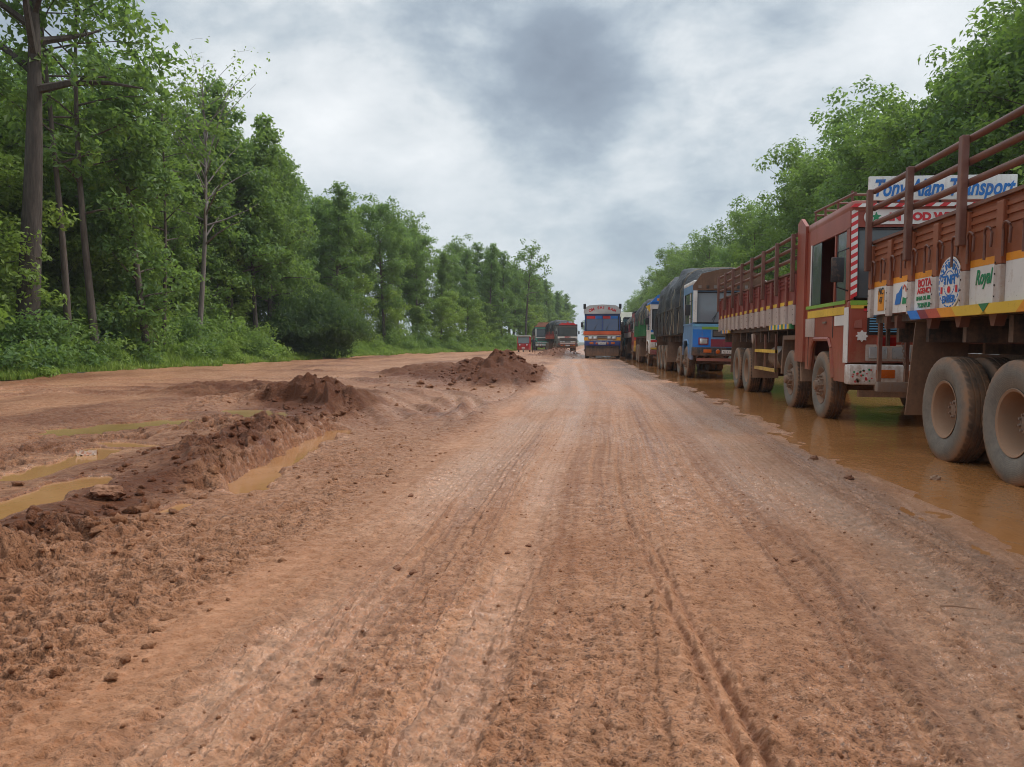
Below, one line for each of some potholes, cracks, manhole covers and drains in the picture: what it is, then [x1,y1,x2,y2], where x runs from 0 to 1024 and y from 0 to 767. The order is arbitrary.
pothole [216,417,359,495]
pothole [0,444,137,482]
pothole [0,472,119,521]
